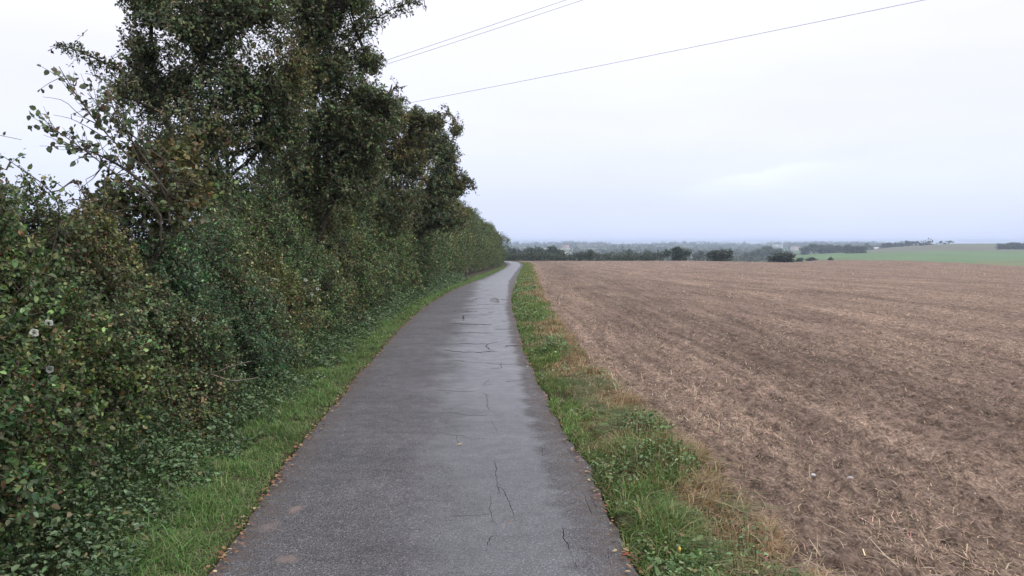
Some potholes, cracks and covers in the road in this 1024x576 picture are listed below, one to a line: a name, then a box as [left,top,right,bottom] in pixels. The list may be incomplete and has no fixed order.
crack [440,290,525,441]
crack [466,460,514,545]
